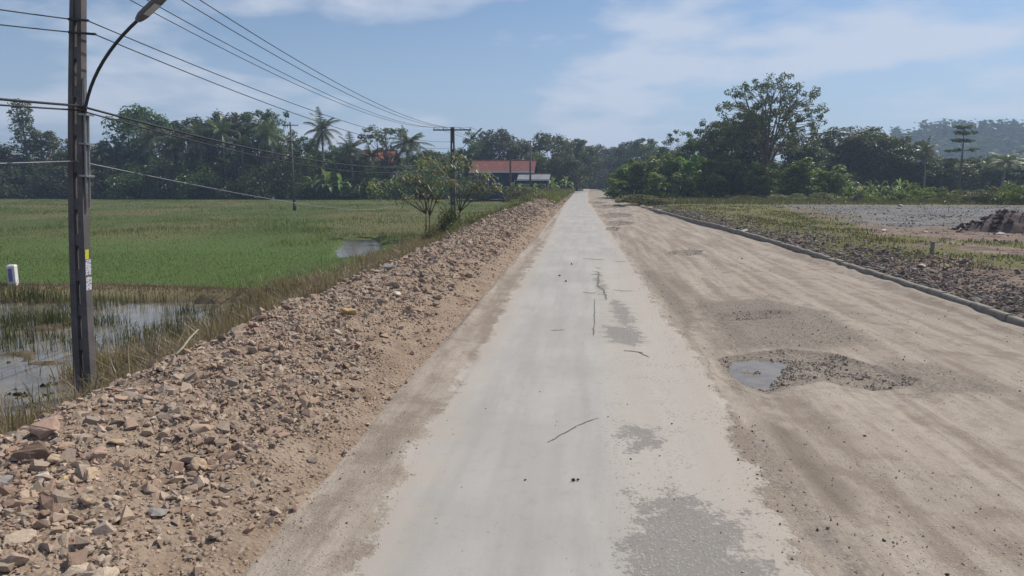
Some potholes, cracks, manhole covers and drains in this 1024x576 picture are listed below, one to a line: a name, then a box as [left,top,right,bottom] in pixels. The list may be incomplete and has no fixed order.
crack [584,258,625,335]
pothole [706,346,937,400]
pothole [693,308,813,324]
